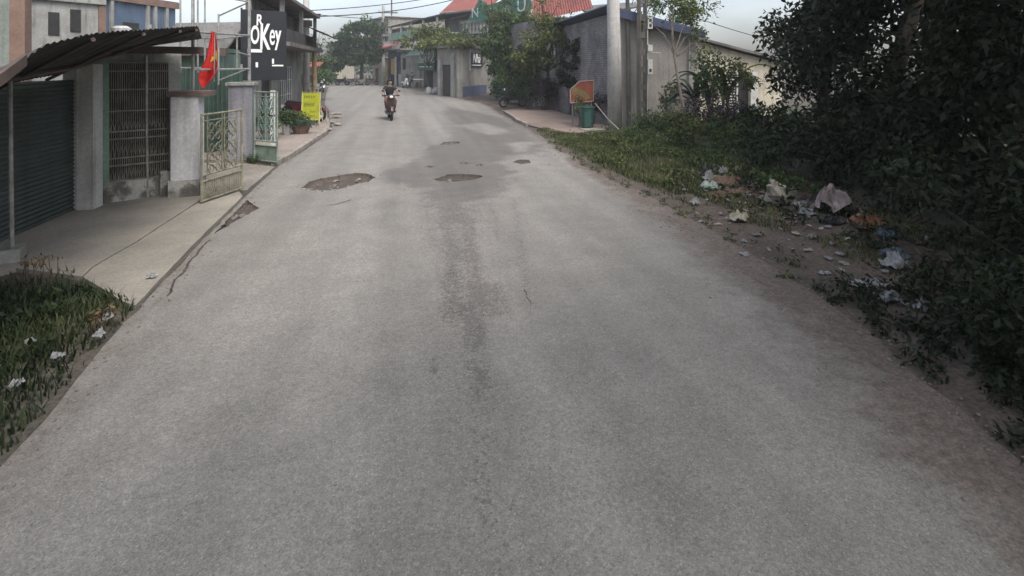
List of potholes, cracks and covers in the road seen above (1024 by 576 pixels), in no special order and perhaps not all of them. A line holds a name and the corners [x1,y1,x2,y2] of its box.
pothole [435,174,483,182]
crack [167,240,210,297]
pothole [215,200,259,233]
pothole [297,170,381,192]
